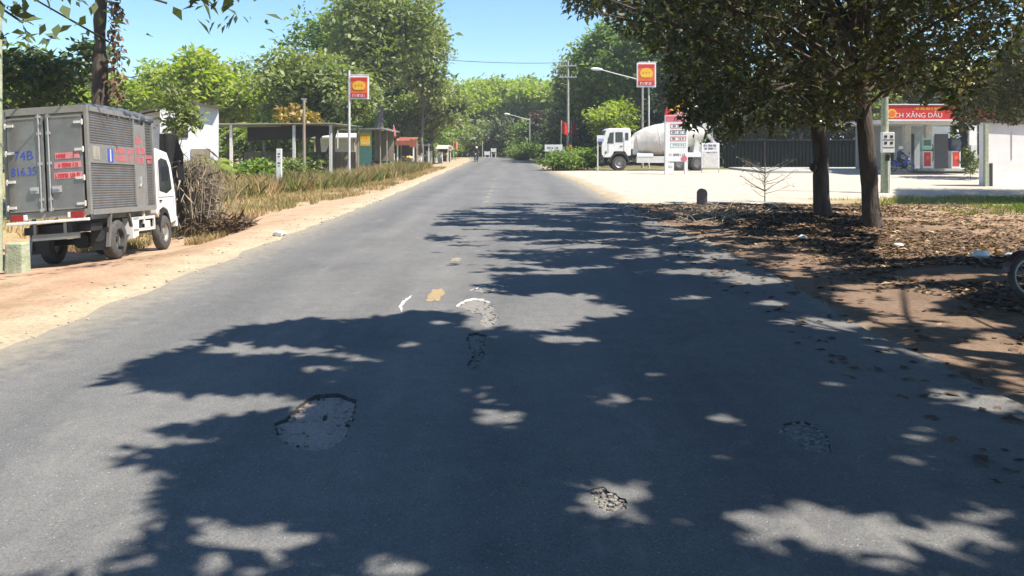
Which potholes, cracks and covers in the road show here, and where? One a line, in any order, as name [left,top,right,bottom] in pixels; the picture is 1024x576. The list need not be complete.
pothole [778,420,831,455]
pothole [274,393,357,451]
pothole [456,298,499,328]
pothole [589,486,628,512]
pothole [466,332,487,371]
